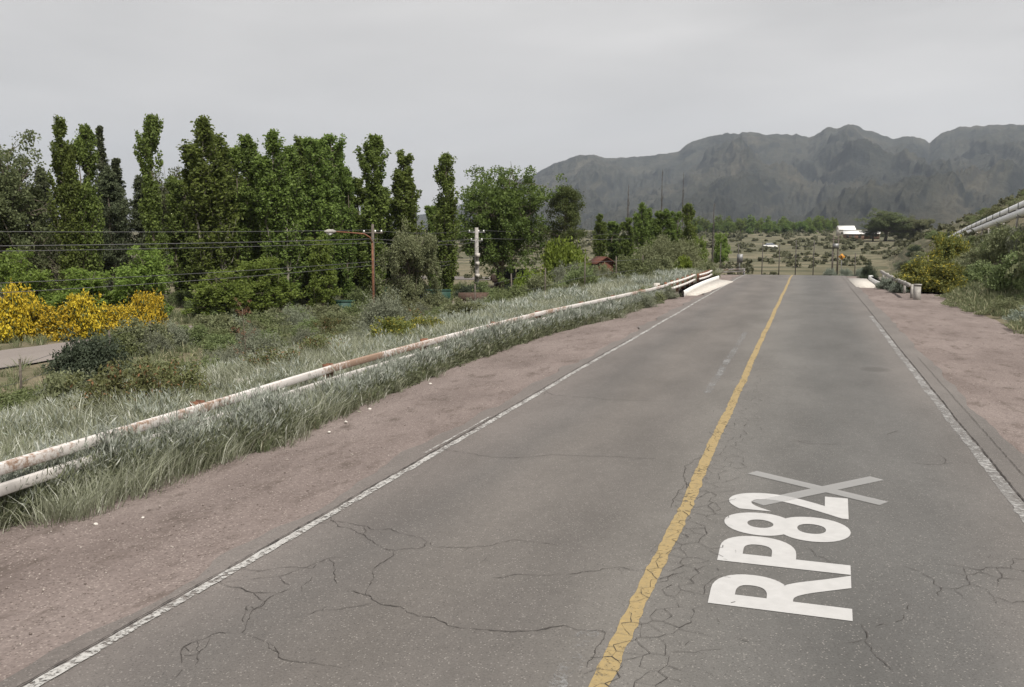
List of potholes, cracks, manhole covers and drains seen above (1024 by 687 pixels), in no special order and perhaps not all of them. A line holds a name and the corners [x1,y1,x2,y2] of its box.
crack [911,554,1024,603]
crack [17,340,772,687]
